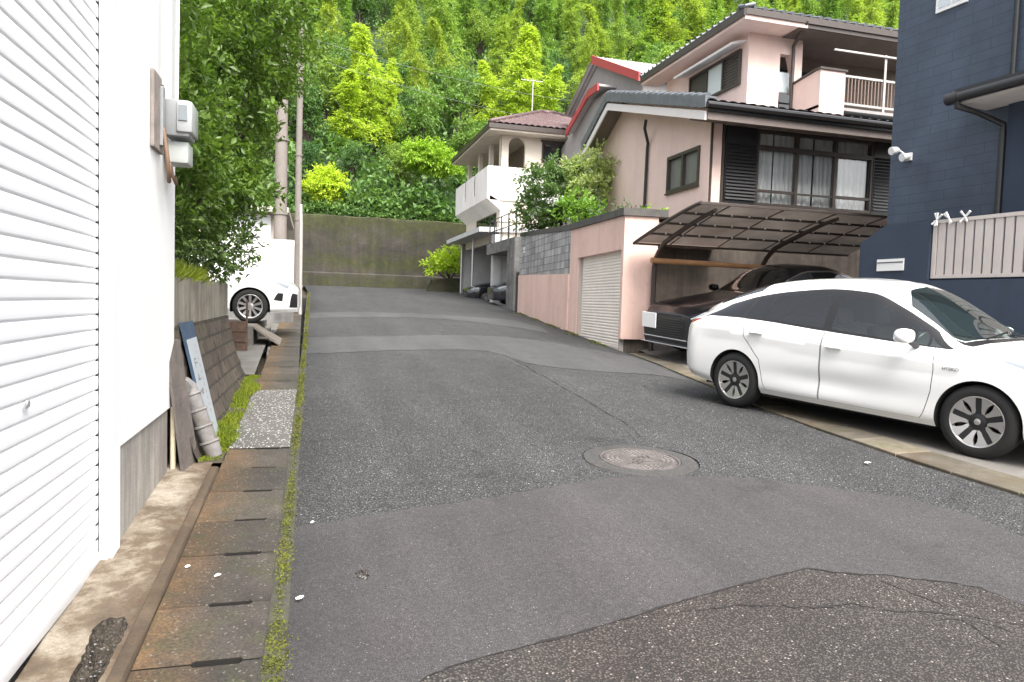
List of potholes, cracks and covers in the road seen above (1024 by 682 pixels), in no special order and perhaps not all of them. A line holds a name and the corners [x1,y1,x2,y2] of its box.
pothole [355,570,369,580]
manhole cover [582,445,700,477]
crack [419,567,1024,682]
